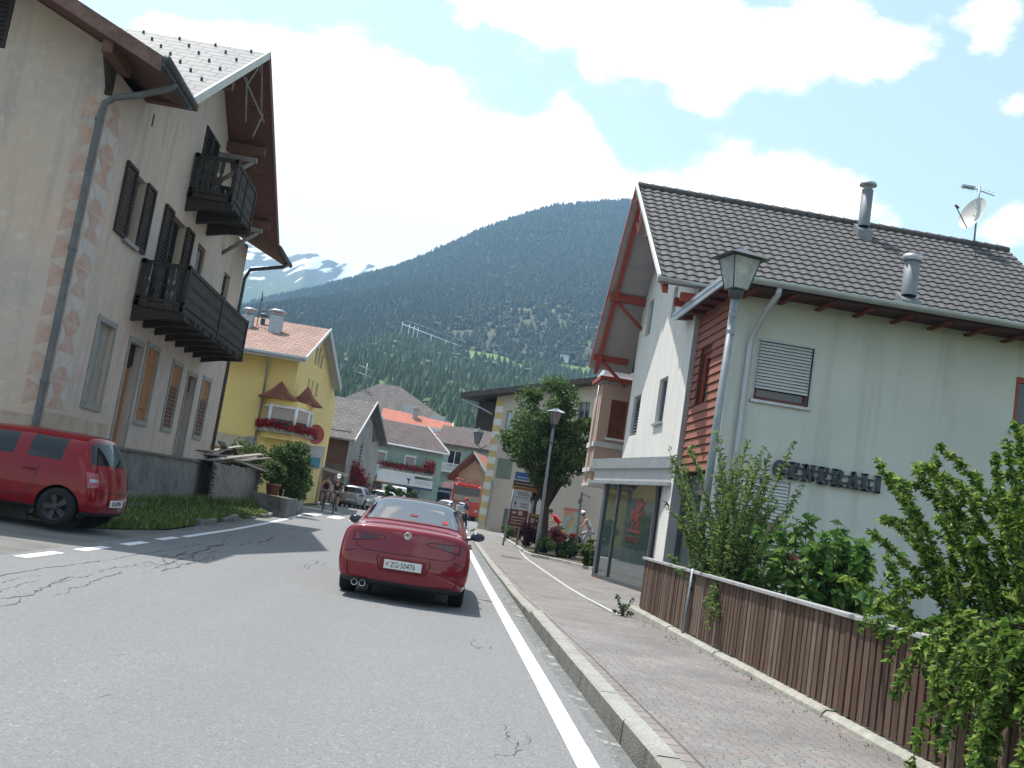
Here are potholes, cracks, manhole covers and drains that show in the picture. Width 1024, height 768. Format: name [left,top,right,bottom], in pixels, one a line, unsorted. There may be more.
crack [0,528,307,606]
